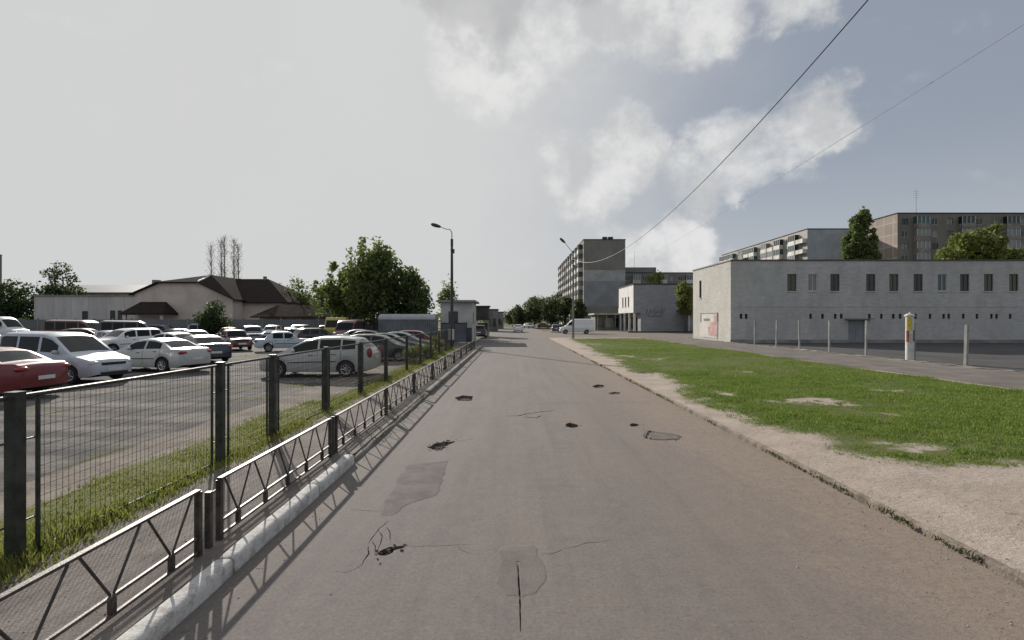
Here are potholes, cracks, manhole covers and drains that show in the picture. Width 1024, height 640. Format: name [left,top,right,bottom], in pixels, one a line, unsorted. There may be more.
pothole [427,439,457,451]
crack [348,510,391,572]
pothole [643,430,682,442]
pothole [375,544,407,564]
